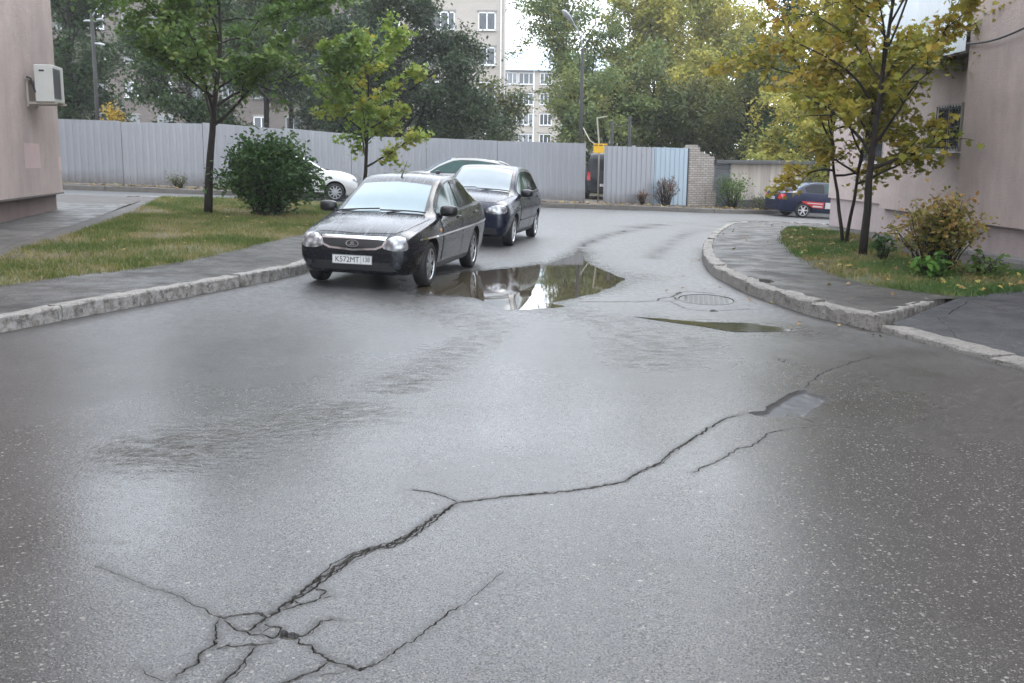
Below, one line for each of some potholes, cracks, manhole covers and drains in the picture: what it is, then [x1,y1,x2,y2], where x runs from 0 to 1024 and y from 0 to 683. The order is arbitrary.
manhole cover [676,294,736,305]
crack [97,415,859,683]
pothole [749,390,827,417]
